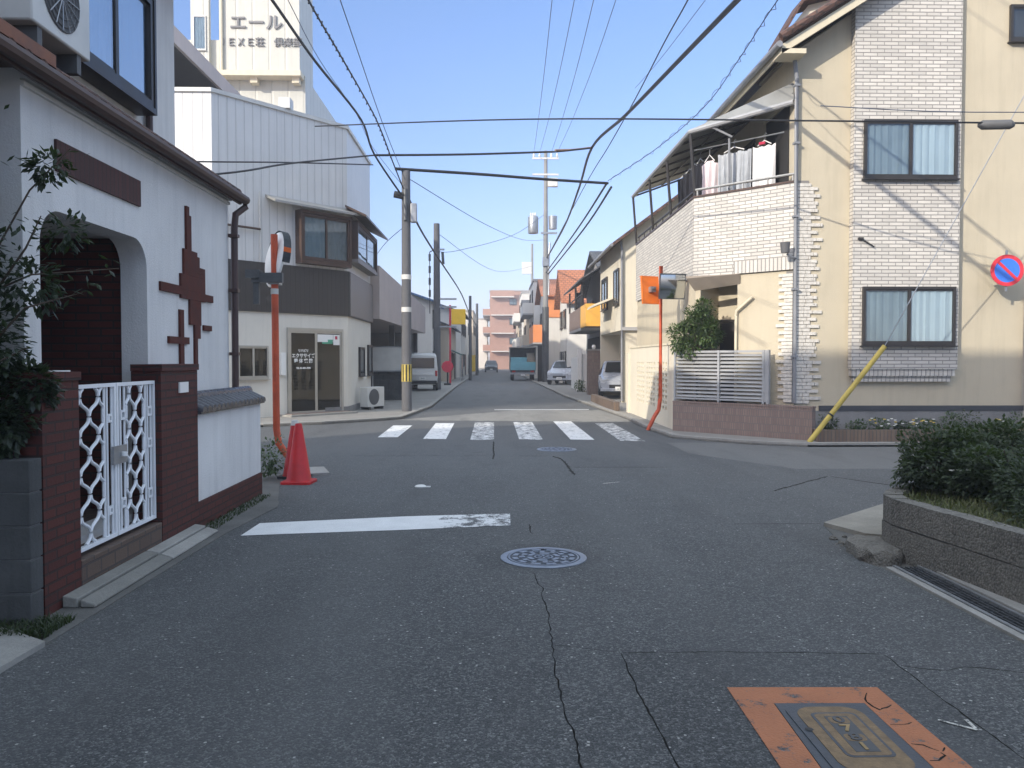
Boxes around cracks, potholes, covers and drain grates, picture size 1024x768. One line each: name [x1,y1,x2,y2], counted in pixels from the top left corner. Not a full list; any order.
utility cover [775,703,933,768]
crack [535,575,583,768]
drain grate [892,565,1024,635]
manhole cover [500,547,587,569]
